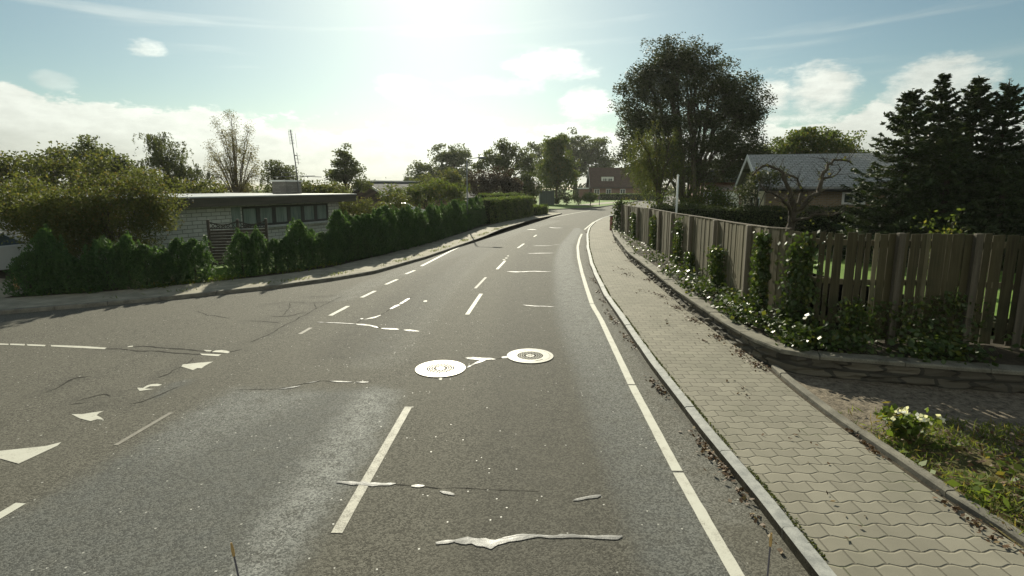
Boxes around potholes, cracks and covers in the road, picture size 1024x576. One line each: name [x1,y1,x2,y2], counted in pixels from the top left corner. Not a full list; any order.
crack [251,296,340,342]
crack [50,376,110,406]
manhole cover [507,348,553,364]
manhole cover [415,360,466,378]
crack [110,346,240,404]
